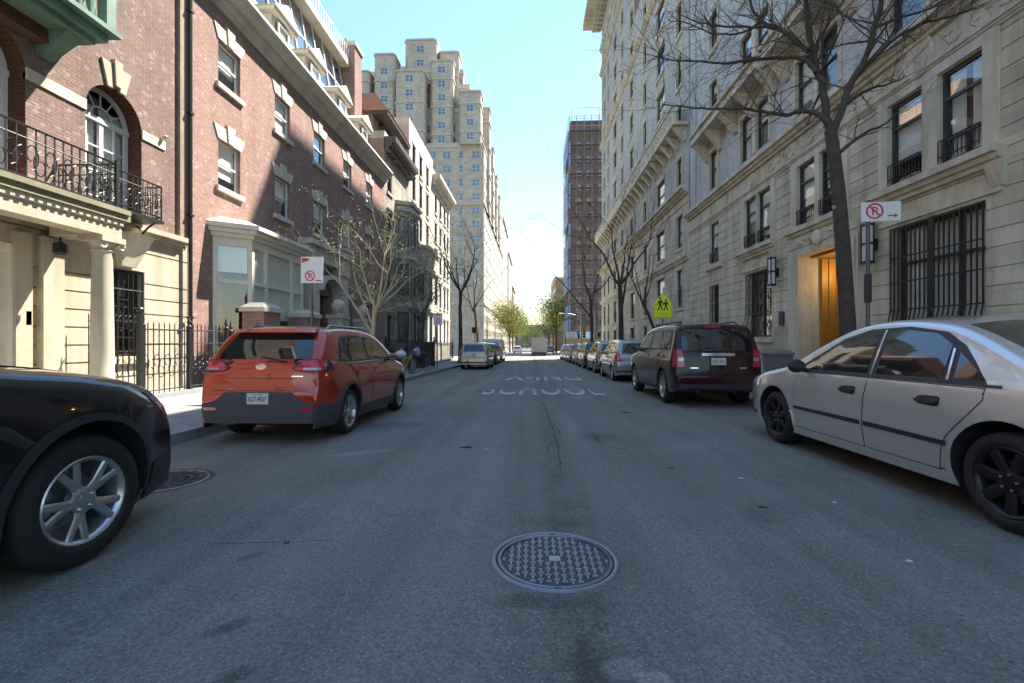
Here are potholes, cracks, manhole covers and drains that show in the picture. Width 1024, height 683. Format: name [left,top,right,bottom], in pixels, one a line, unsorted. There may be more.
manhole cover [152,469,215,493]
crack [455,395,586,466]
manhole cover [490,532,621,593]
